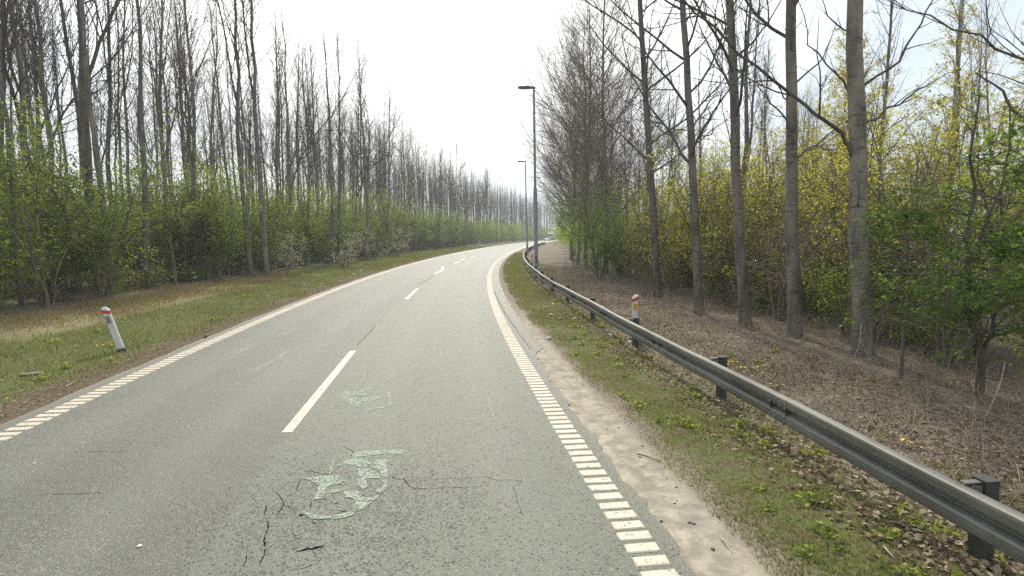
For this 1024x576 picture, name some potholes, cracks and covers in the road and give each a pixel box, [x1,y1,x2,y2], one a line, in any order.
crack [392,476,523,515]
crack [243,447,382,570]
